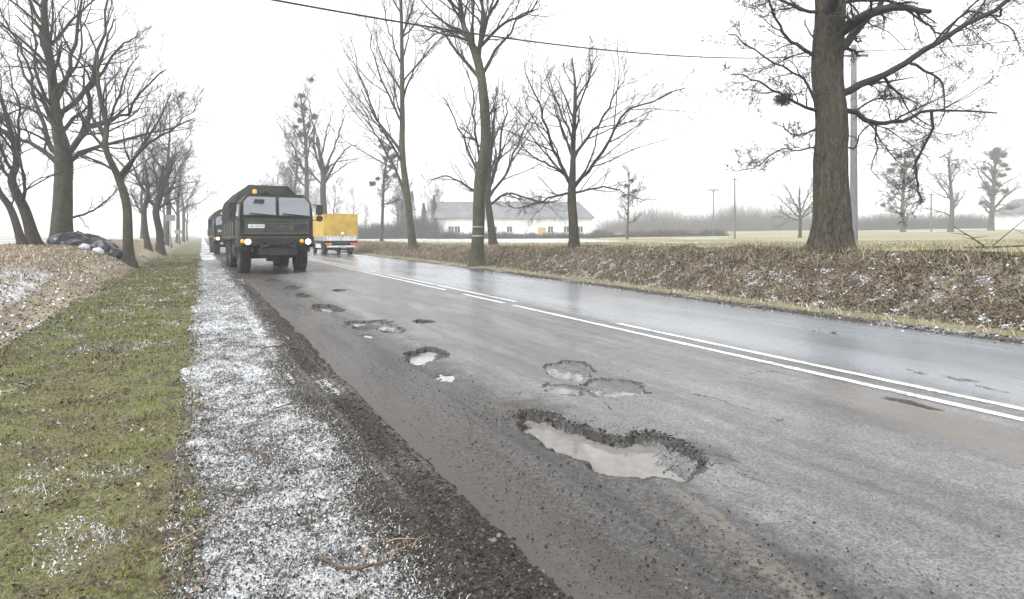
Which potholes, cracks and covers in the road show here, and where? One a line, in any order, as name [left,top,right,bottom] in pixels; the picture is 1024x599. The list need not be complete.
crack [686,369,794,426]
pothole [508,408,719,488]
pothole [306,303,350,313]
pothole [572,376,658,400]
pothole [339,319,411,334]
pothole [535,359,602,385]
pothole [532,381,591,398]
pothole [421,370,465,384]
pothole [396,345,456,366]
